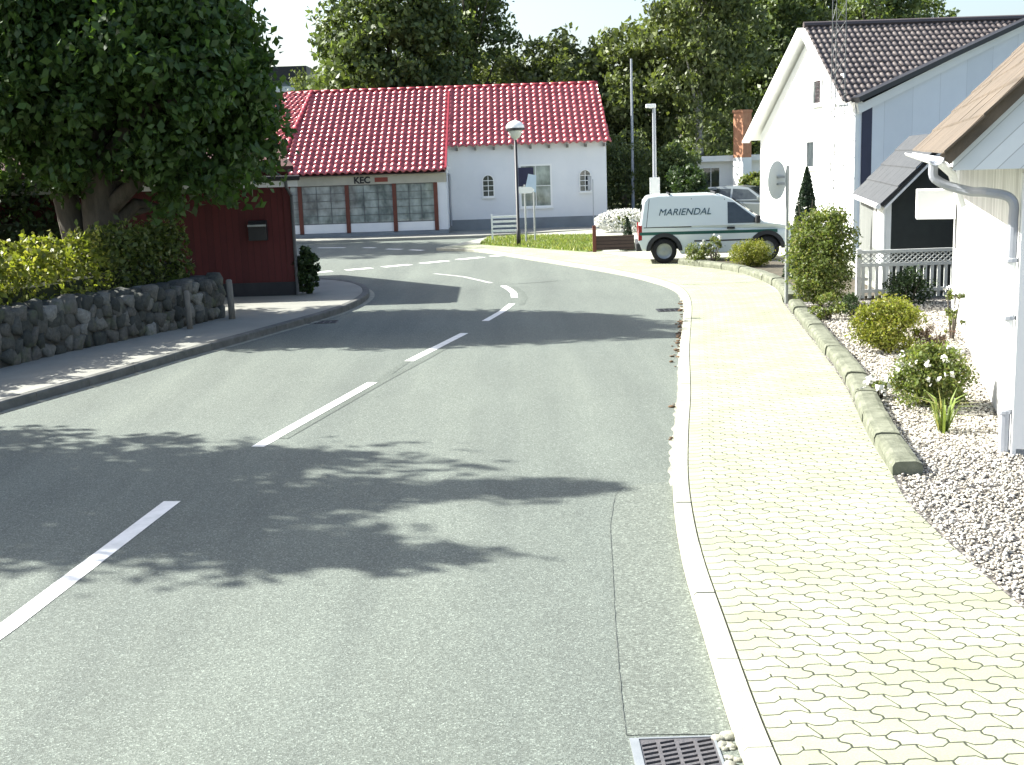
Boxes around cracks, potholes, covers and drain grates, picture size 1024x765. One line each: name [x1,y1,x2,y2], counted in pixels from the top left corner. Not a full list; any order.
drain grate [629,735,724,765]
